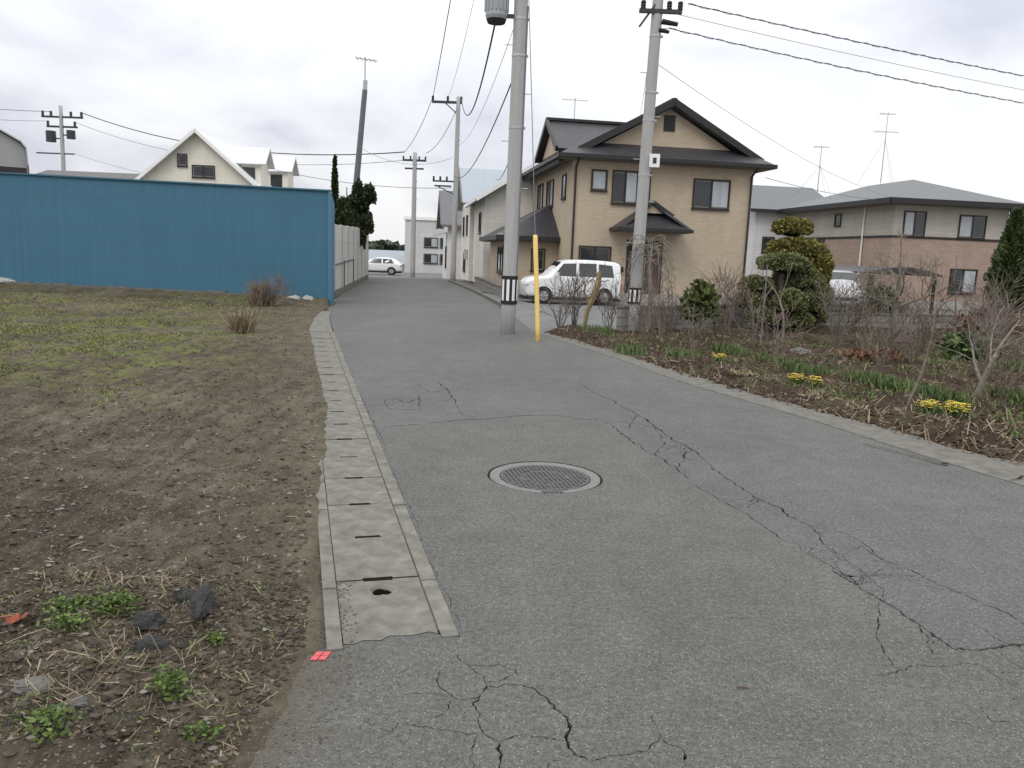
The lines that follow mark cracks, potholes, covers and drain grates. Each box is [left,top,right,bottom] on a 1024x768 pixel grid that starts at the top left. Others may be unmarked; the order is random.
manhole cover [489,462,601,493]
crack [593,392,1003,653]
crack [437,681,686,765]
